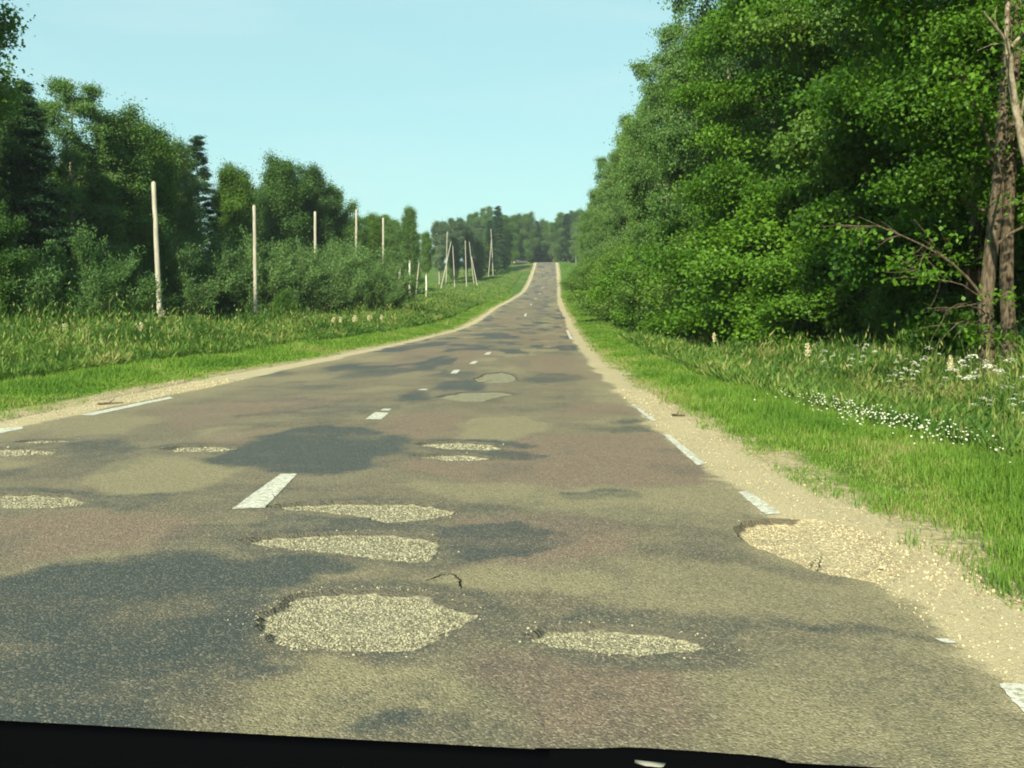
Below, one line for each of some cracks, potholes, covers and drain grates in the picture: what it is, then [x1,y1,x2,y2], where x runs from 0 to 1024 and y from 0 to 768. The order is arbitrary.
pothole [238,529,460,563]
crack [426,573,465,589]
pothole [413,452,497,461]
pothole [161,444,241,452]
pothole [413,440,508,450]
pothole [0,446,65,457]
pothole [0,491,96,509]
pothole [227,583,504,660]
pothole [266,497,464,524]
pothole [504,618,740,660]
pothole [733,517,915,584]
